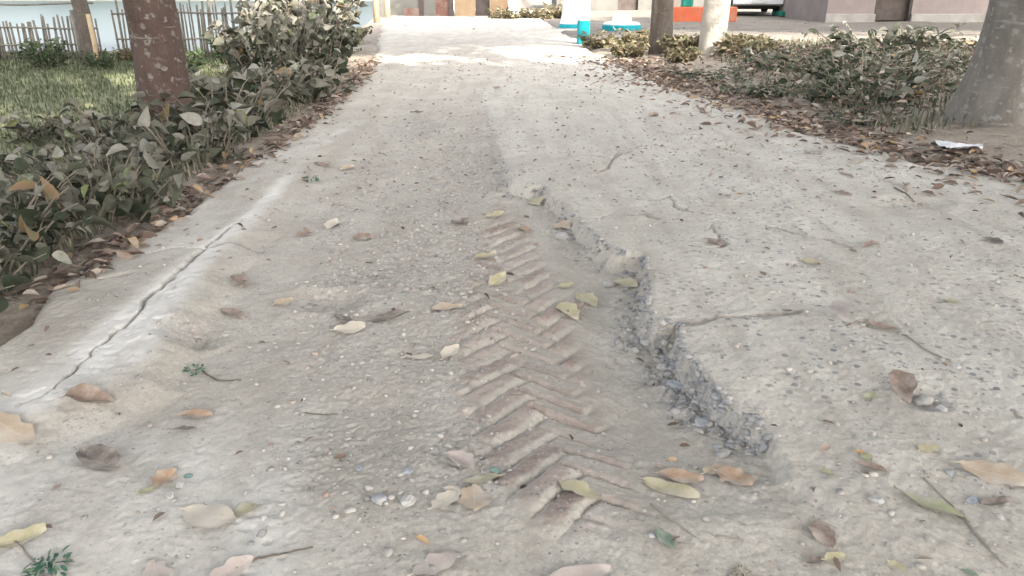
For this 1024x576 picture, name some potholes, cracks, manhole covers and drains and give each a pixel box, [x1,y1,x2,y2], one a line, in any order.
crack [665,307,805,349]
crack [17,220,267,407]
pothole [443,153,782,557]
crack [552,144,654,172]
